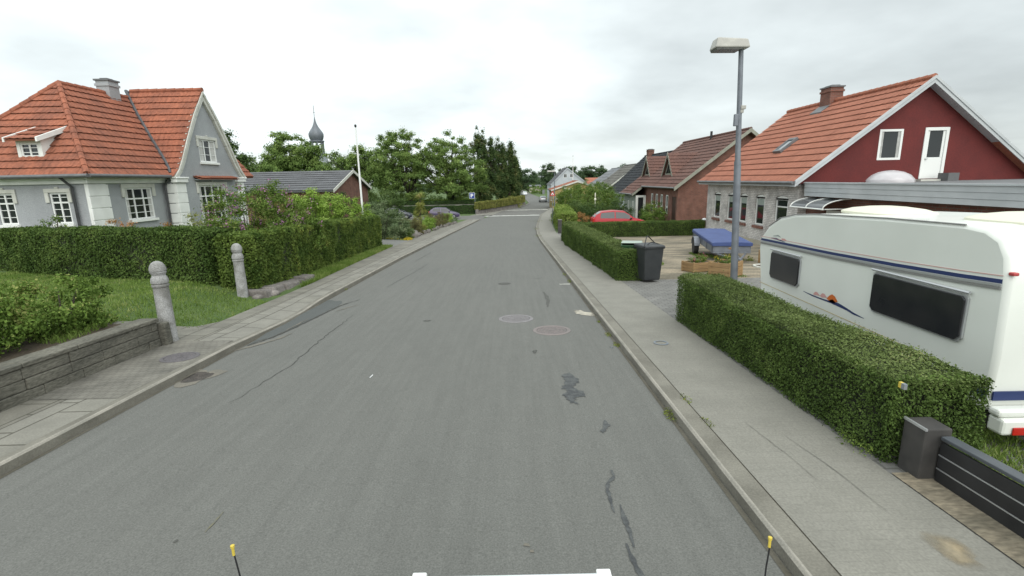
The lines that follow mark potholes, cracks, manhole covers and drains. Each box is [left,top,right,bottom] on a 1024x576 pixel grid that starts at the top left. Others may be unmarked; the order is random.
manhole cover [533,325,571,335]
manhole cover [159,352,200,363]
crack [241,299,360,397]
manhole cover [499,315,533,323]
